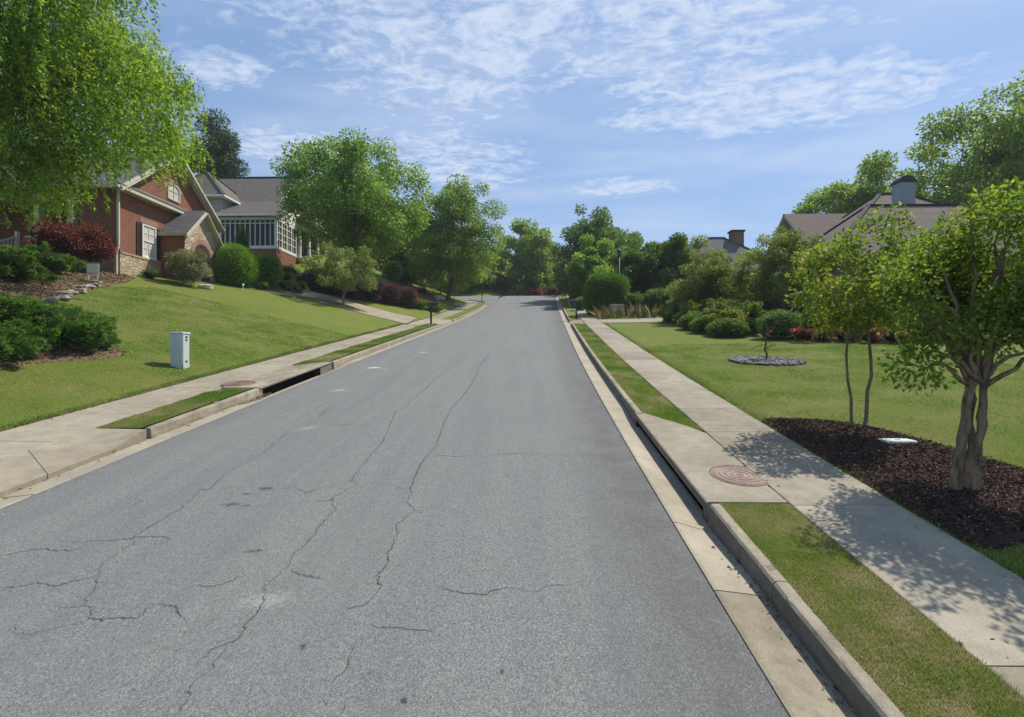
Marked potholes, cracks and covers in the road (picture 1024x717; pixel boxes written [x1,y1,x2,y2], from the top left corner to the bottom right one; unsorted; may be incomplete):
crack [438,584,572,595]
manhole cover [709,465,768,487]
crack [173,354,489,717]
drain grate [222,362,332,400]
crack [2,430,288,639]
